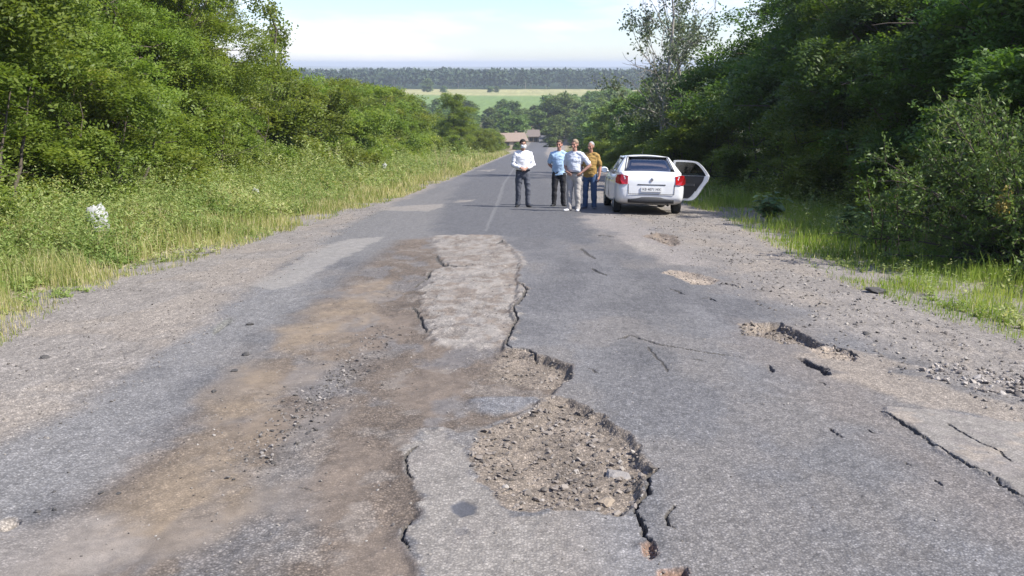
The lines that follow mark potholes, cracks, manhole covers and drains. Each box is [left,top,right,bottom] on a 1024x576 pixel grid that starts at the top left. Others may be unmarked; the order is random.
pothole [467,395,658,517]
crack [400,523,411,551]
pothole [737,321,825,349]
crack [634,468,676,542]
crack [884,412,1021,496]
crack [618,335,737,372]
crack [580,235,614,276]
pothole [660,270,720,285]
pothole [642,233,681,247]
crack [404,446,417,480]
